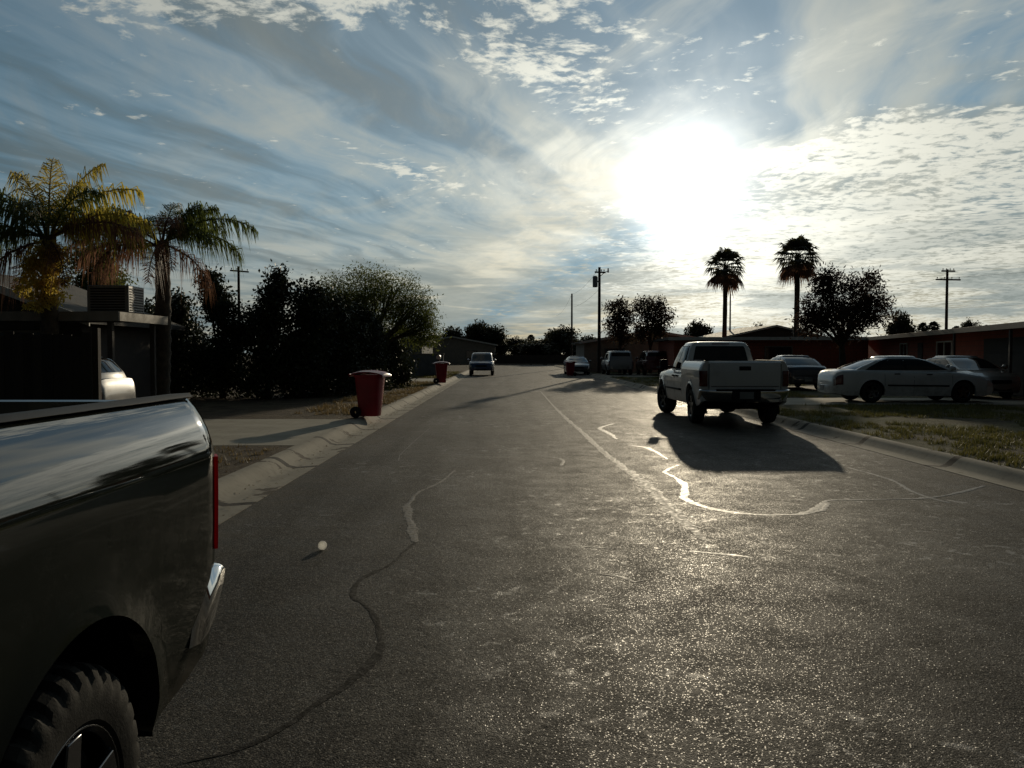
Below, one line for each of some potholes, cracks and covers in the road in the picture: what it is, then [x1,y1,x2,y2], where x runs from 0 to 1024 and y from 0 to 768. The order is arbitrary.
crack [598,424,668,459]
crack [439,454,565,466]
crack [693,538,768,558]
